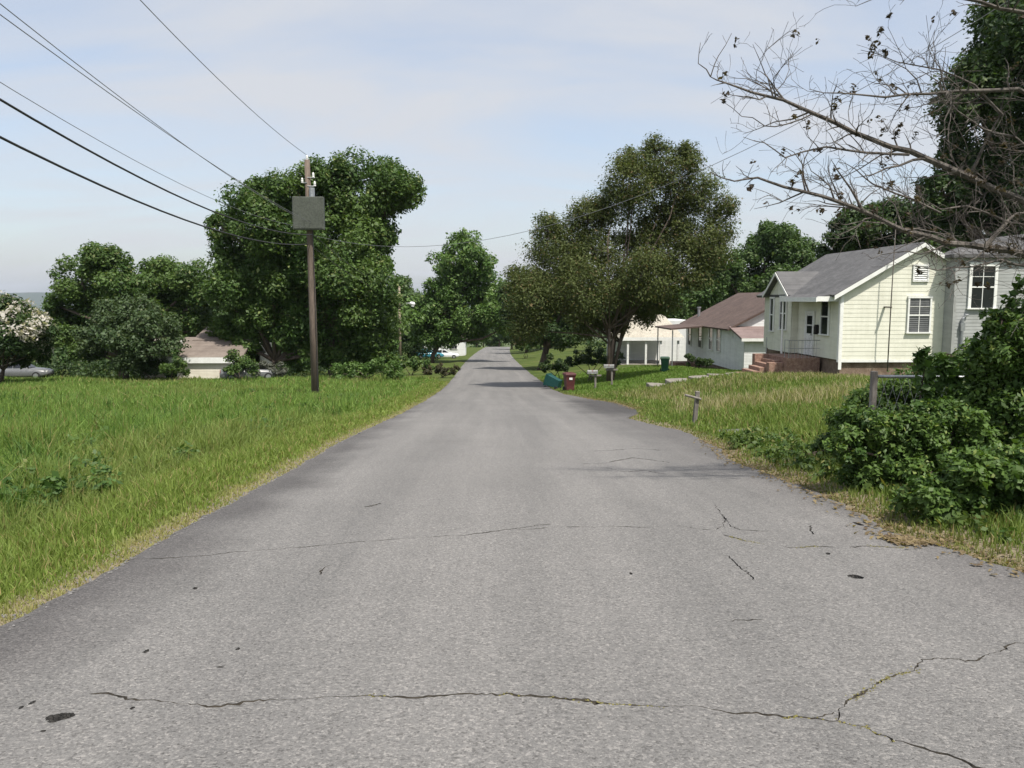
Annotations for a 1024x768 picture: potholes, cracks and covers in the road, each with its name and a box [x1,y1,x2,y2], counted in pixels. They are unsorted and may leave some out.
pothole [45,713,75,723]
crack [93,642,1016,768]
crack [124,524,644,561]
crack [690,506,913,580]
